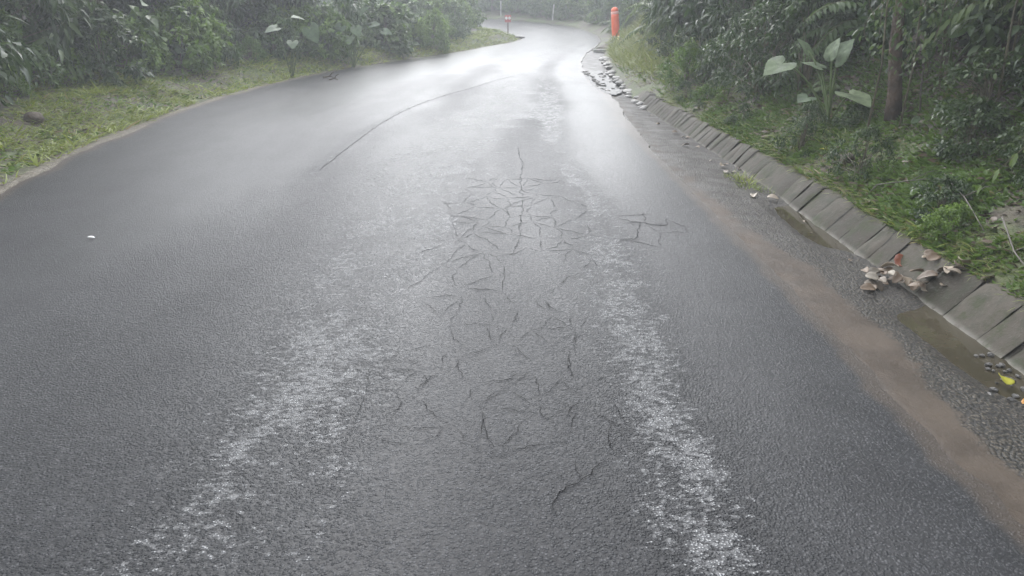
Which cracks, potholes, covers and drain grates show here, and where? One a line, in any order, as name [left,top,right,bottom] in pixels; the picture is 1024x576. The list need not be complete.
crack [346,148,631,516]
crack [614,214,683,246]
